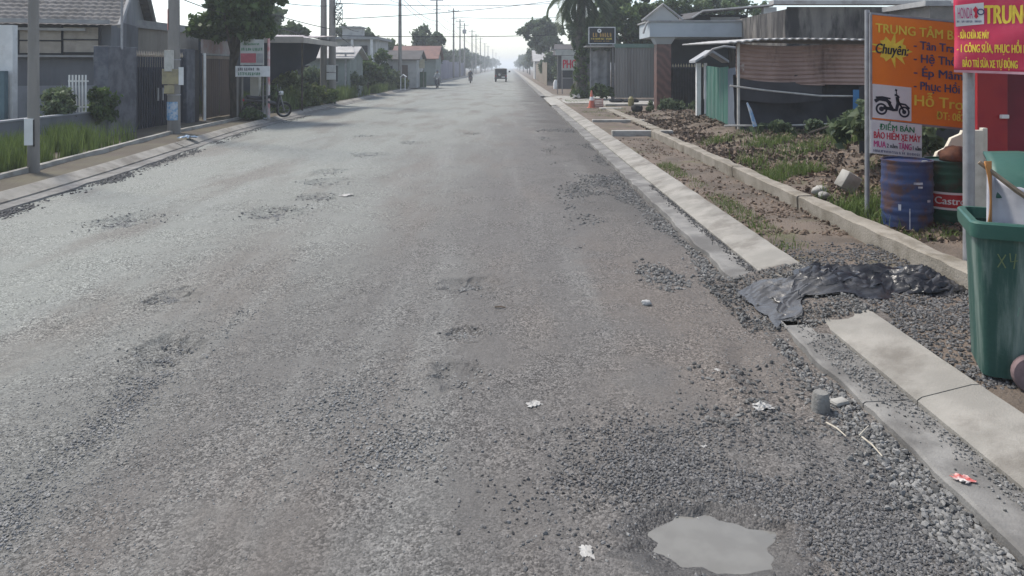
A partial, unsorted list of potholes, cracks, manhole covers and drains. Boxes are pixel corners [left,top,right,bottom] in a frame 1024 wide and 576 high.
pothole [605,495,823,576]
pothole [131,283,210,310]
pothole [437,324,492,344]
pothole [295,175,363,188]
pothole [421,356,497,399]
pothole [62,210,178,233]
pothole [117,325,251,384]
pothole [215,204,322,224]
pothole [428,274,510,298]
pothole [291,192,342,203]
